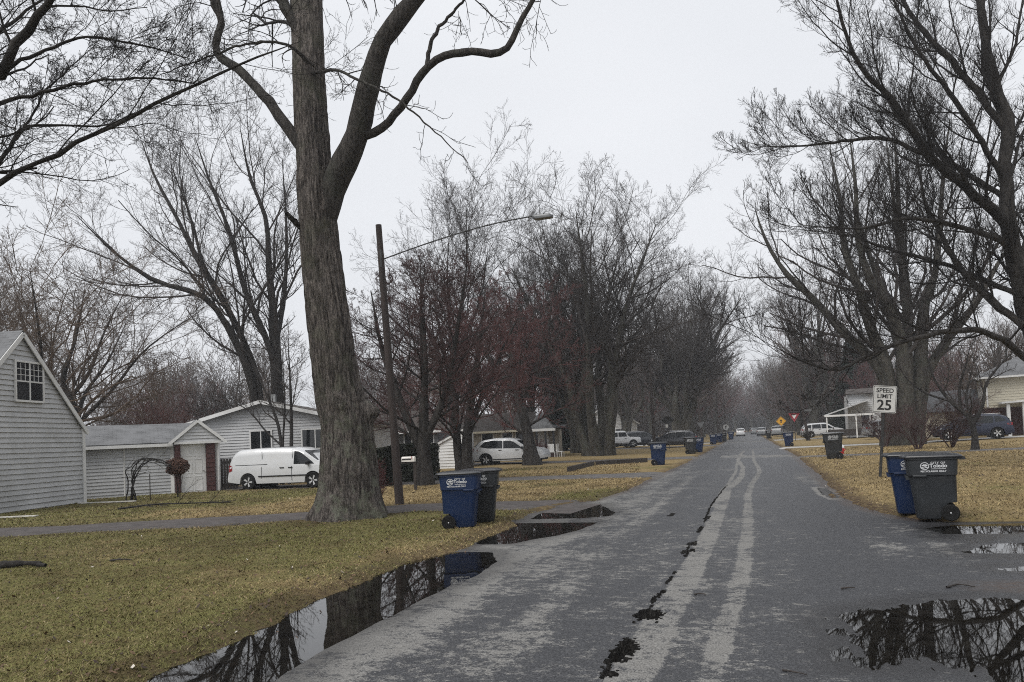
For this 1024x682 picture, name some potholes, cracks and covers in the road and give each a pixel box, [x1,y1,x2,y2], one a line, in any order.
pothole [600,637,641,672]
crack [599,486,726,679]
pothole [632,607,666,624]
